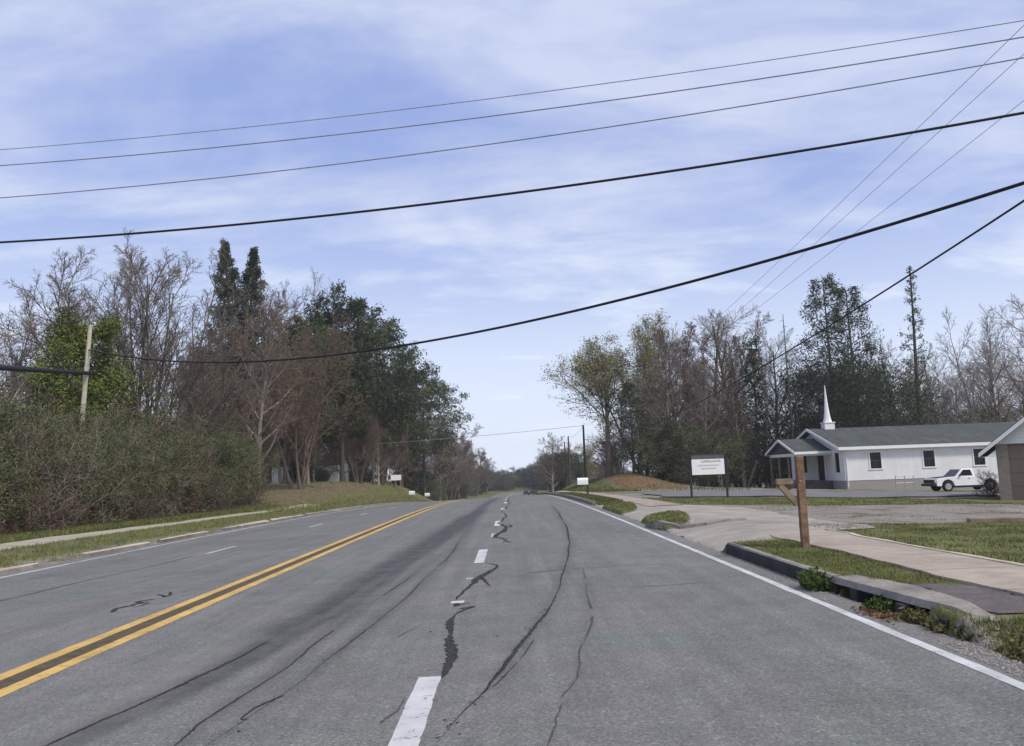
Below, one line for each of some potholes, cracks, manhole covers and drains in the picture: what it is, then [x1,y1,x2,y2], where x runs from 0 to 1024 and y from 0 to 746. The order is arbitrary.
crack [45,510,697,746]
crack [492,499,513,545]
